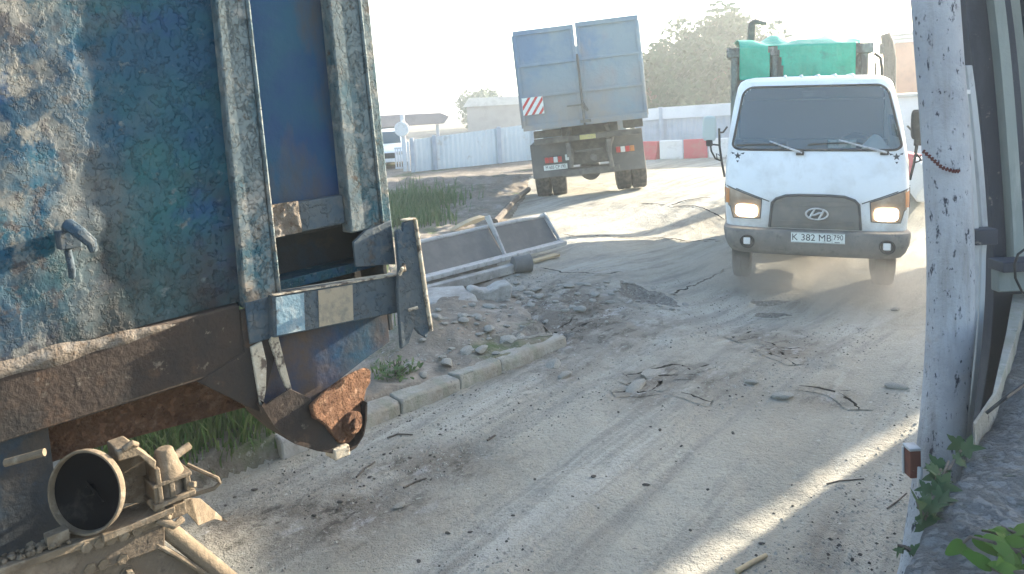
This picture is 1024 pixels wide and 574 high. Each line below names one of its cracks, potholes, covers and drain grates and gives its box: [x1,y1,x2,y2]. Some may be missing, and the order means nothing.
crack [524,317,597,335]
crack [610,361,715,407]
pothole [742,299,799,309]
crack [536,266,626,275]
crack [724,330,873,410]
pothole [746,312,801,320]
crack [666,267,732,296]
pothole [604,275,696,313]
